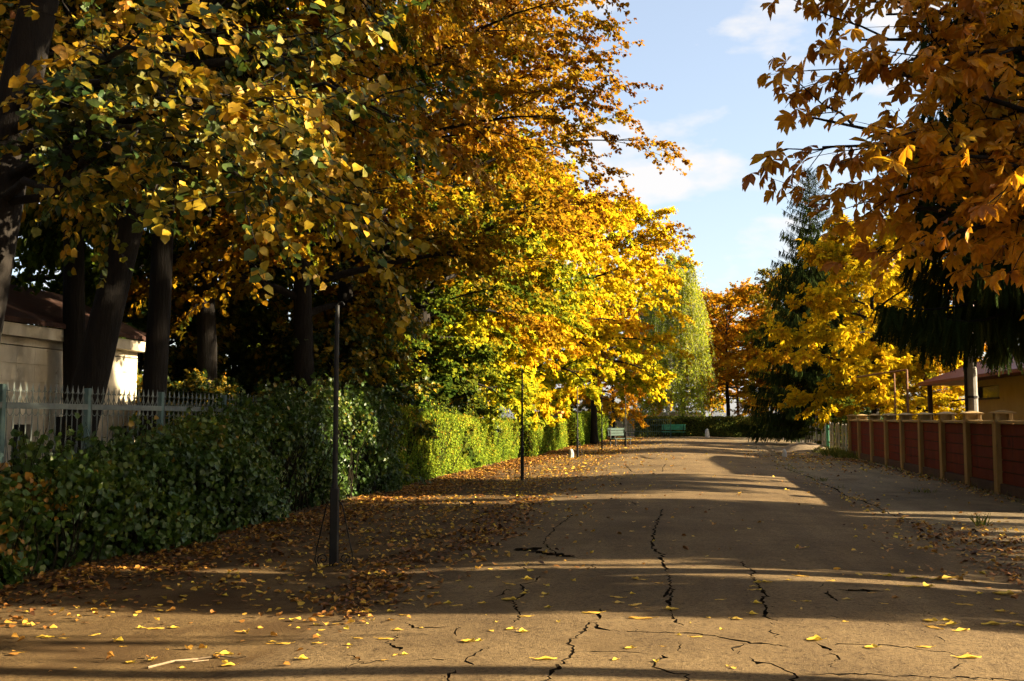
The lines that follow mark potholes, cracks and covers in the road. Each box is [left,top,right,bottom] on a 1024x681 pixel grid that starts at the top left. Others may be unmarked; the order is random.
crack [498,514,597,623]
crack [343,622,489,681]
crack [544,509,1024,681]
